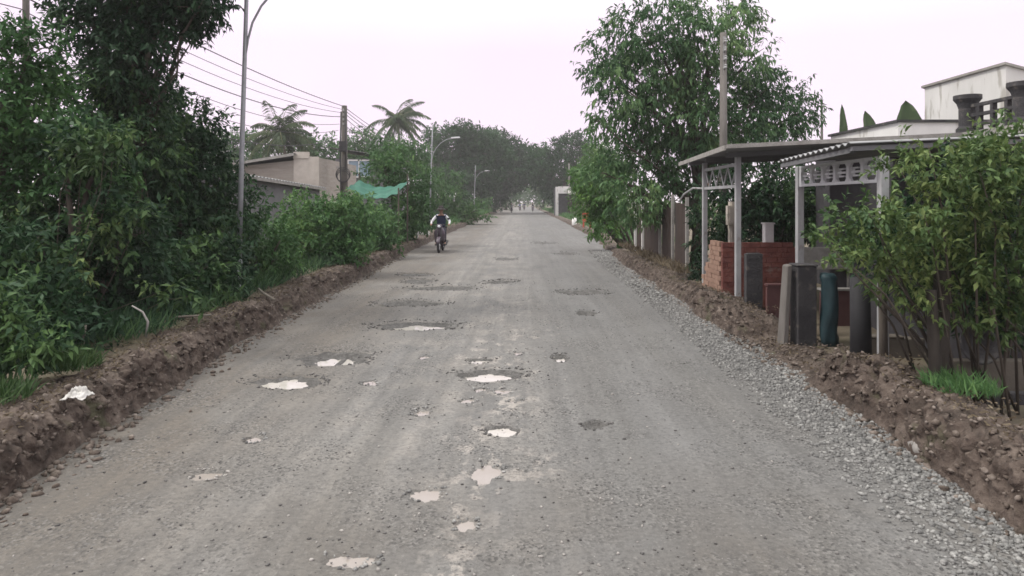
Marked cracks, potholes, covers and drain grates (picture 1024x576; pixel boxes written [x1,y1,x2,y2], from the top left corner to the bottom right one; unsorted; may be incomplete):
pothole [362,318,463,331]
pothole [465,458,508,486]
pothole [578,418,614,431]
pothole [549,352,570,363]
pothole [451,515,482,532]
pothole [320,550,385,571]
pothole [402,486,448,503]
pothole [186,467,231,481]
pothole [480,422,522,437]
pothole [446,366,534,385]
pothole [280,348,381,368]
